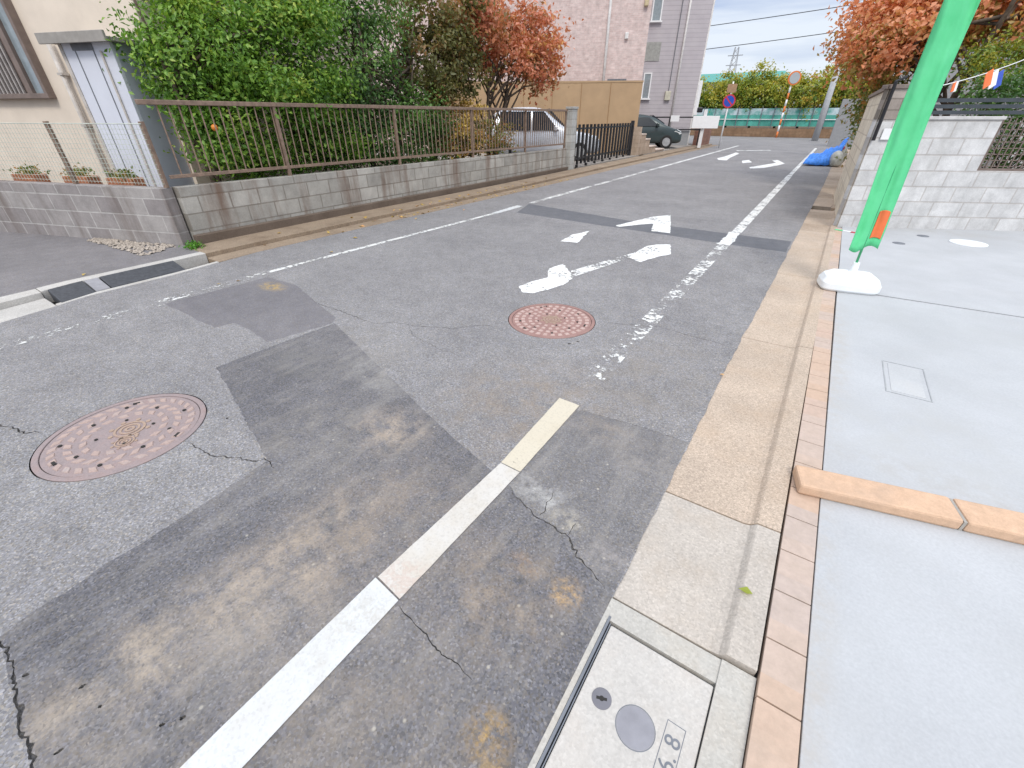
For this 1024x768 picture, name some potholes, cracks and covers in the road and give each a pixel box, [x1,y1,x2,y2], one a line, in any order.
crack [0,641,38,768]
crack [188,443,273,468]
manhole cover [30,394,207,482]
utility cover [882,360,933,403]
crack [512,491,605,589]
crack [400,607,473,681]
manhole cover [949,239,989,247]
manhole cover [509,303,595,339]
